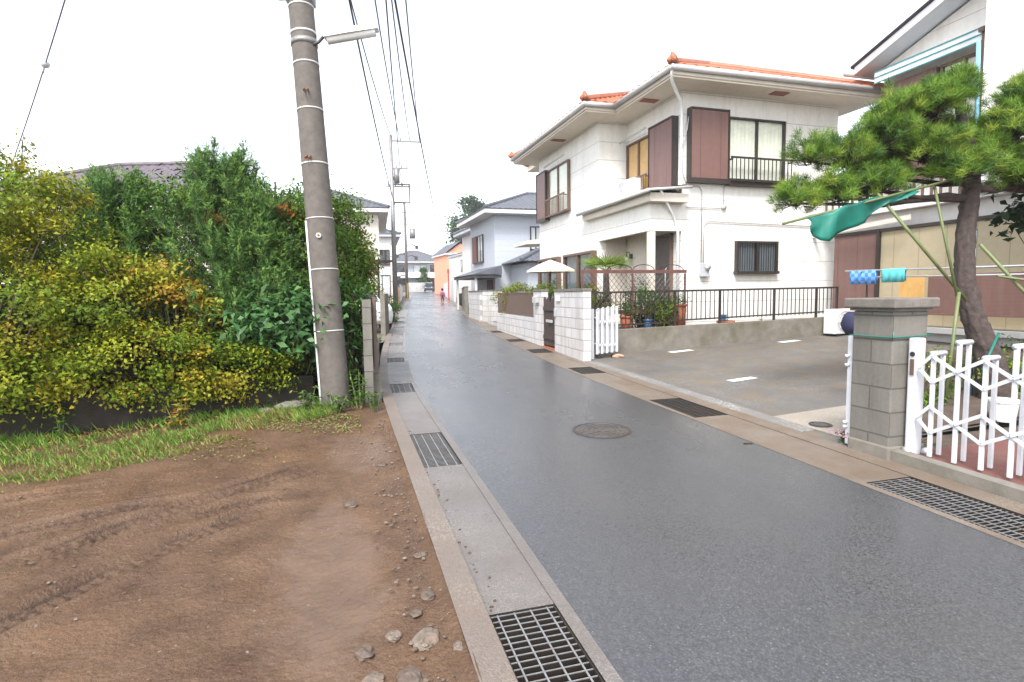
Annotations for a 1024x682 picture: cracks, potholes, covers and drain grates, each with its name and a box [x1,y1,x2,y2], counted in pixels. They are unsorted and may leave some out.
drain grate [390,384,415,393]
drain grate [868,477,1024,543]
drain grate [410,433,462,468]
drain grate [651,398,727,418]
manhole cover [572,422,632,438]
drain grate [489,605,604,682]
